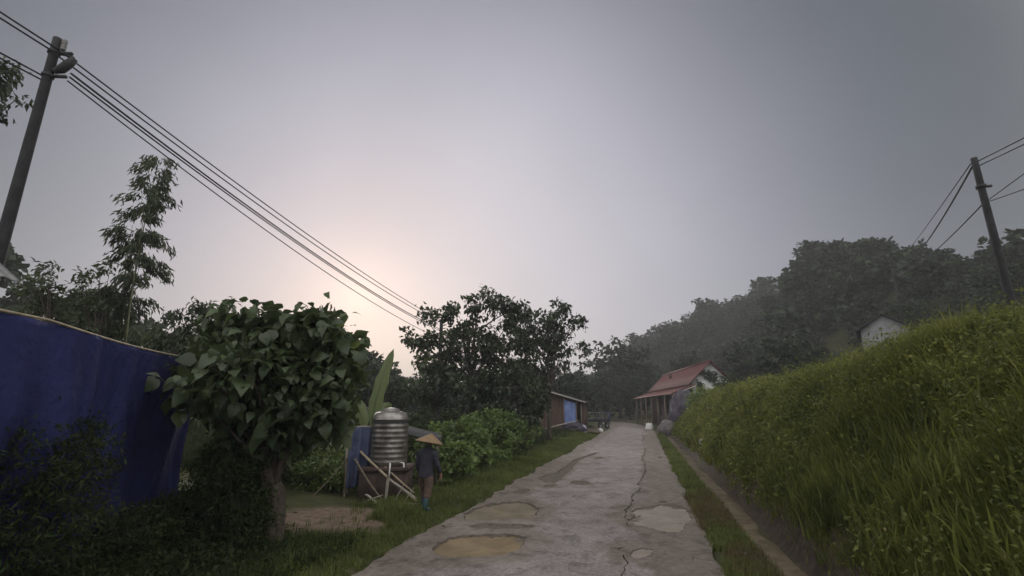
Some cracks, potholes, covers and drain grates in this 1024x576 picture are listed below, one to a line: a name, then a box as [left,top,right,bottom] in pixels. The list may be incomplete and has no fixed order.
pothole [463,501,540,521]
pothole [433,533,527,558]
pothole [631,504,692,532]
crack [624,437,647,527]
pothole [630,548,654,559]
pothole [538,453,596,483]
